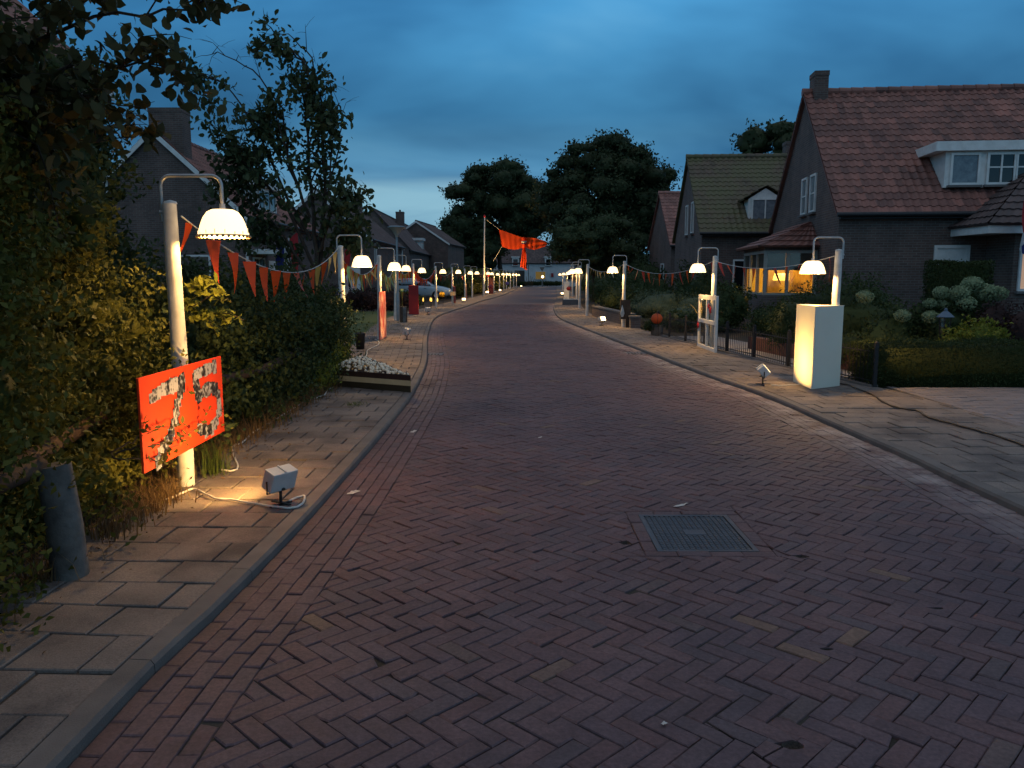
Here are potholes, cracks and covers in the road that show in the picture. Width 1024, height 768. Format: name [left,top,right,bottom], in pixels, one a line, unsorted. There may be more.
manhole cover [638,515,760,552]
pothole [782,741,804,749]
